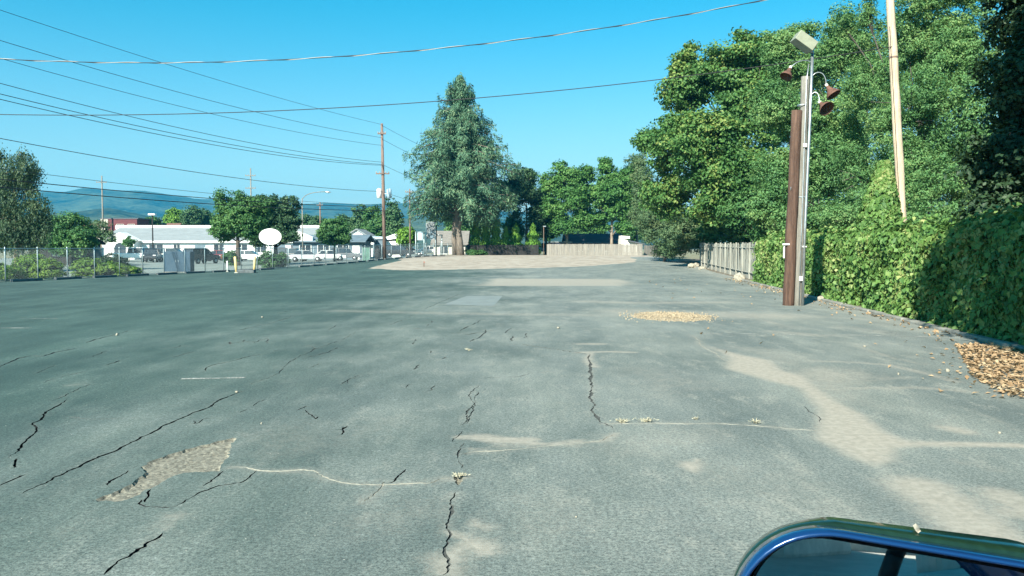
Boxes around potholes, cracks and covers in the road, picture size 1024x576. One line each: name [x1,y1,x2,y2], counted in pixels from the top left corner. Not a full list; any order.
pothole [95,438,236,502]
crack [0,298,822,575]
